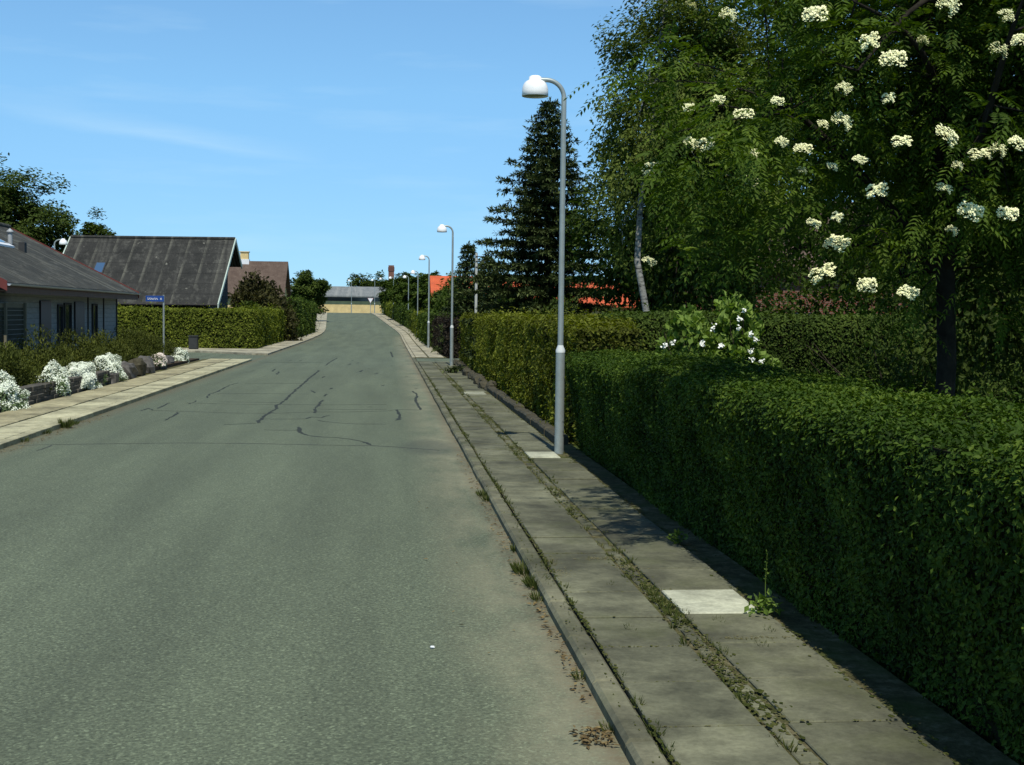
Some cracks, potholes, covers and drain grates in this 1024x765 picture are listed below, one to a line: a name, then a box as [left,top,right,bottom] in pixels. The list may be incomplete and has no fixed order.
crack [18,352,432,451]
